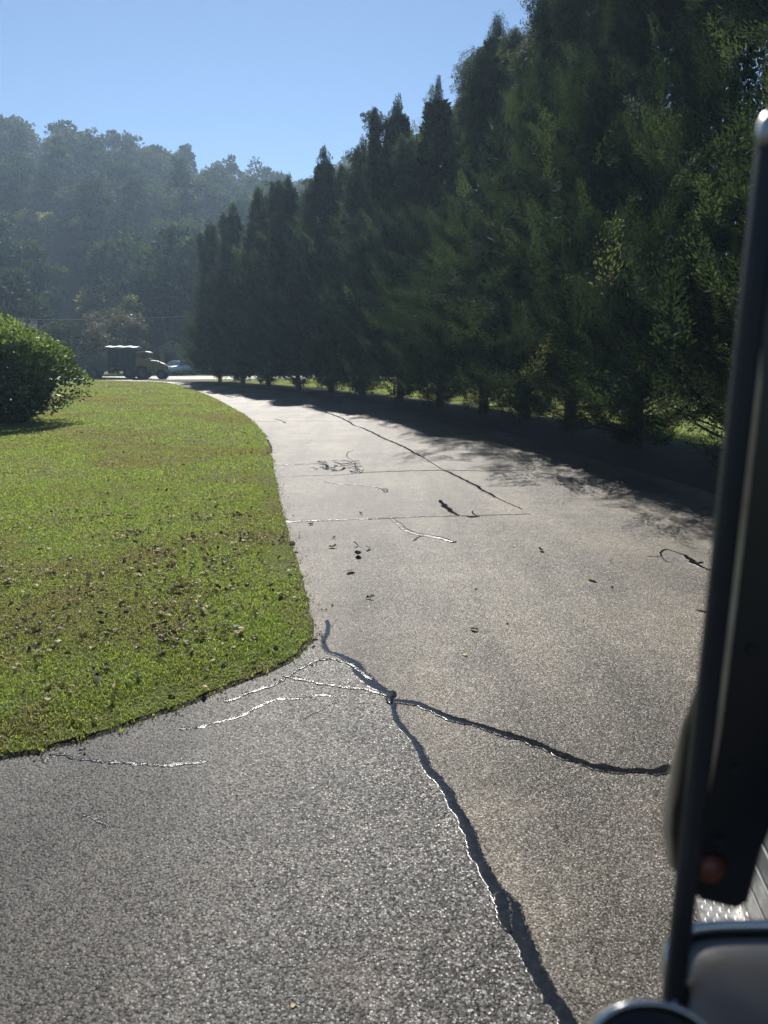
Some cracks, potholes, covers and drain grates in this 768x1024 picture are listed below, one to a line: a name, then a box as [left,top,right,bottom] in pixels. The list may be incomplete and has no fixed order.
crack [658,549,709,570]
crack [254,419,516,492]
crack [287,500,511,543]
